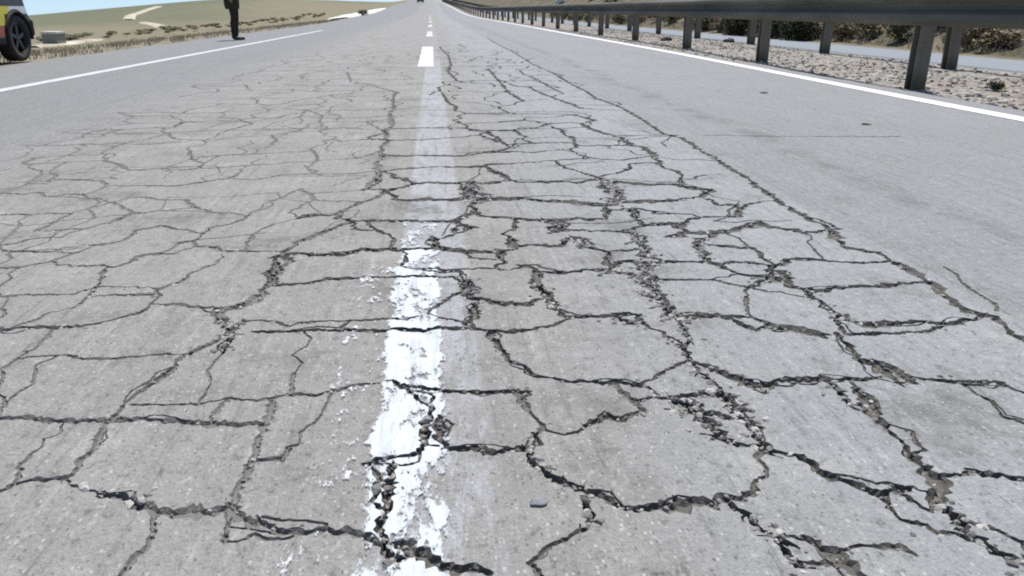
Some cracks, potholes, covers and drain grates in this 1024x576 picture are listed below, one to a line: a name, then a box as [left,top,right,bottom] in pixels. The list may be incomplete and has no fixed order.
crack [250,42,1024,576]
crack [0,52,422,576]
